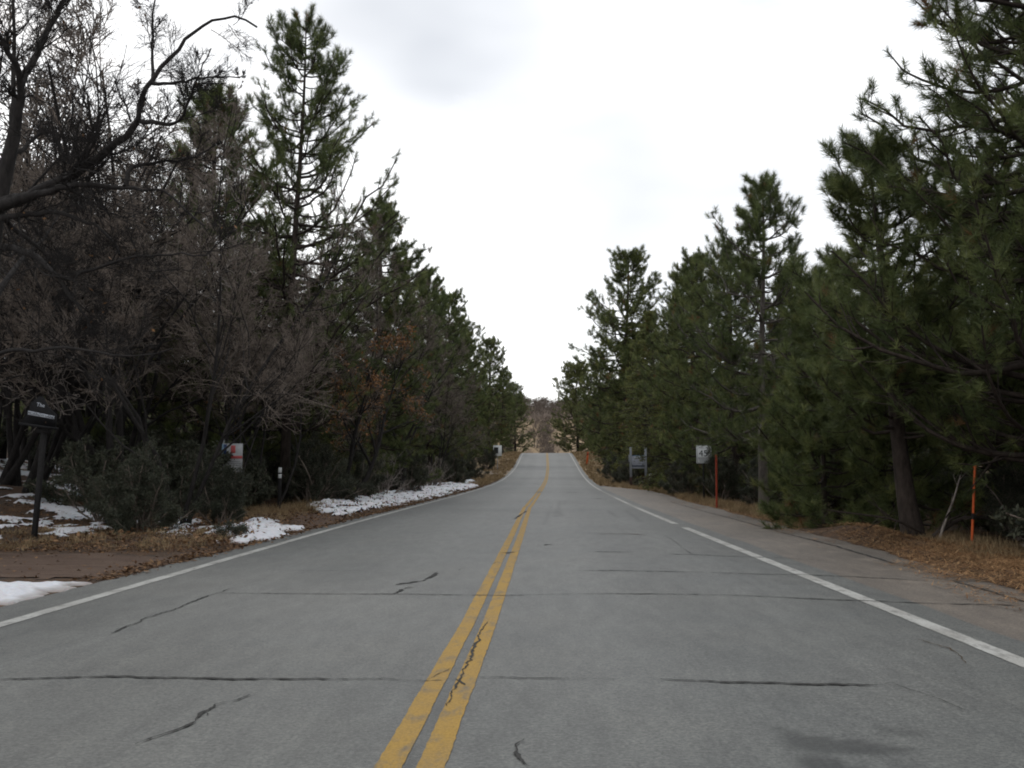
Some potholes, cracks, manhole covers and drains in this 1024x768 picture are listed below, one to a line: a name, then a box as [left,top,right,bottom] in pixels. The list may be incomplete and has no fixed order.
crack [513,739,529,766]
crack [8,623,597,744]
crack [112,587,233,633]
crack [312,572,1024,605]
